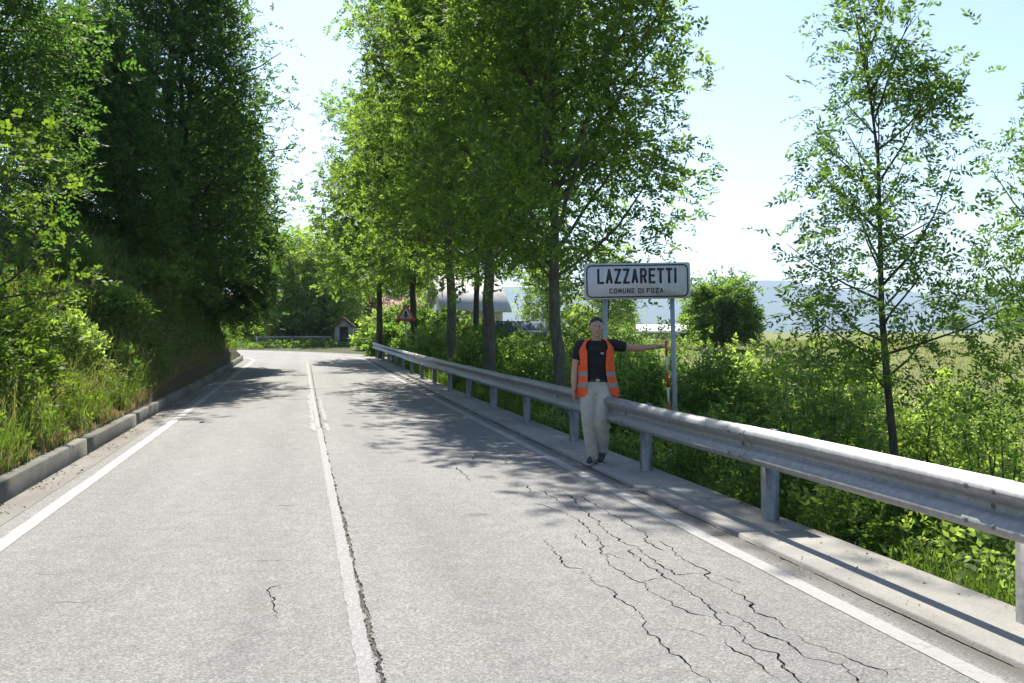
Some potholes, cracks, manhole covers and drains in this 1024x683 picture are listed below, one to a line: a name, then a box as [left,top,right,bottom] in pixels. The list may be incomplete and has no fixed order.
crack [310,366,387,683]
crack [374,362,1015,683]
